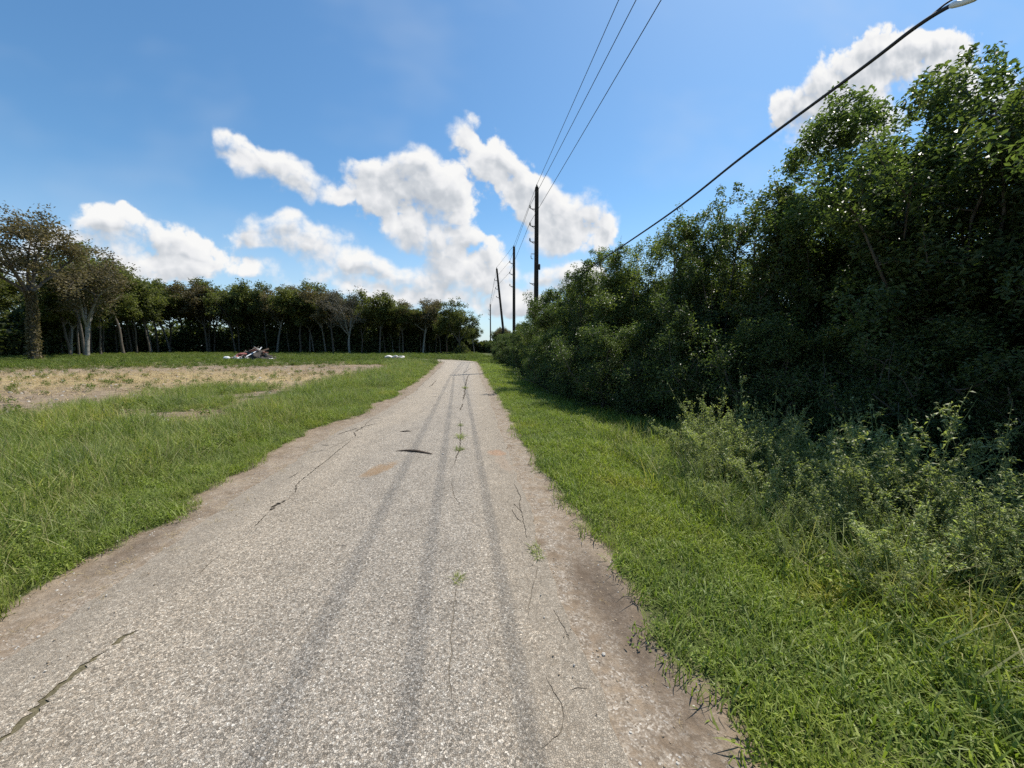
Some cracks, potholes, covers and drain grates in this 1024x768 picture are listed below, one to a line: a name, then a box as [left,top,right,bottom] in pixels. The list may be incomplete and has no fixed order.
crack [255,419,372,526]
crack [0,630,137,742]
crack [543,678,588,748]
crack [448,585,458,708]
crack [454,368,471,464]
